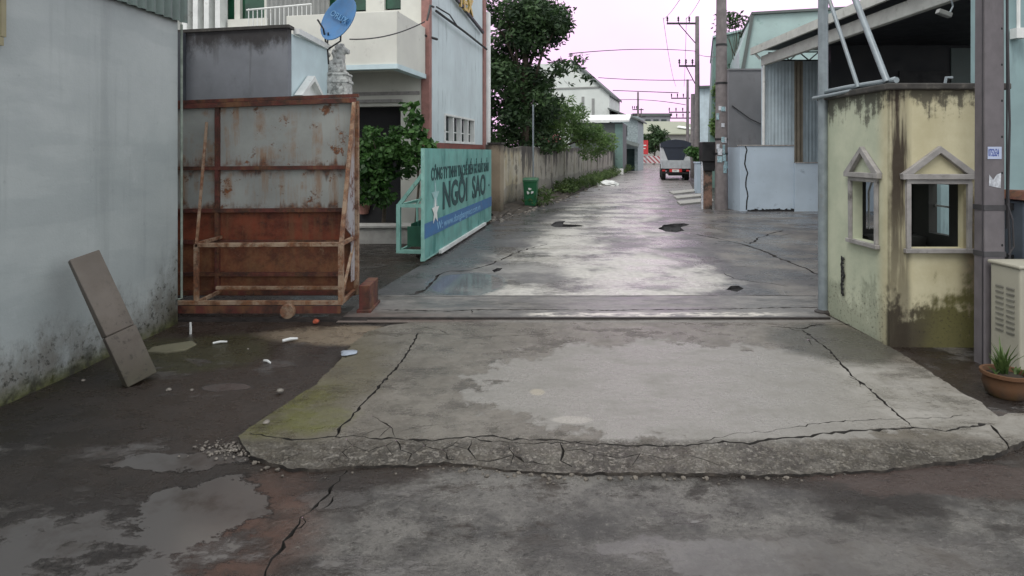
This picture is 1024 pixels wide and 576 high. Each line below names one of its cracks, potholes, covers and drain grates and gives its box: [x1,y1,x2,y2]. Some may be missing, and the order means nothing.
crack [250,244,1021,576]
pothole [658,223,689,232]
